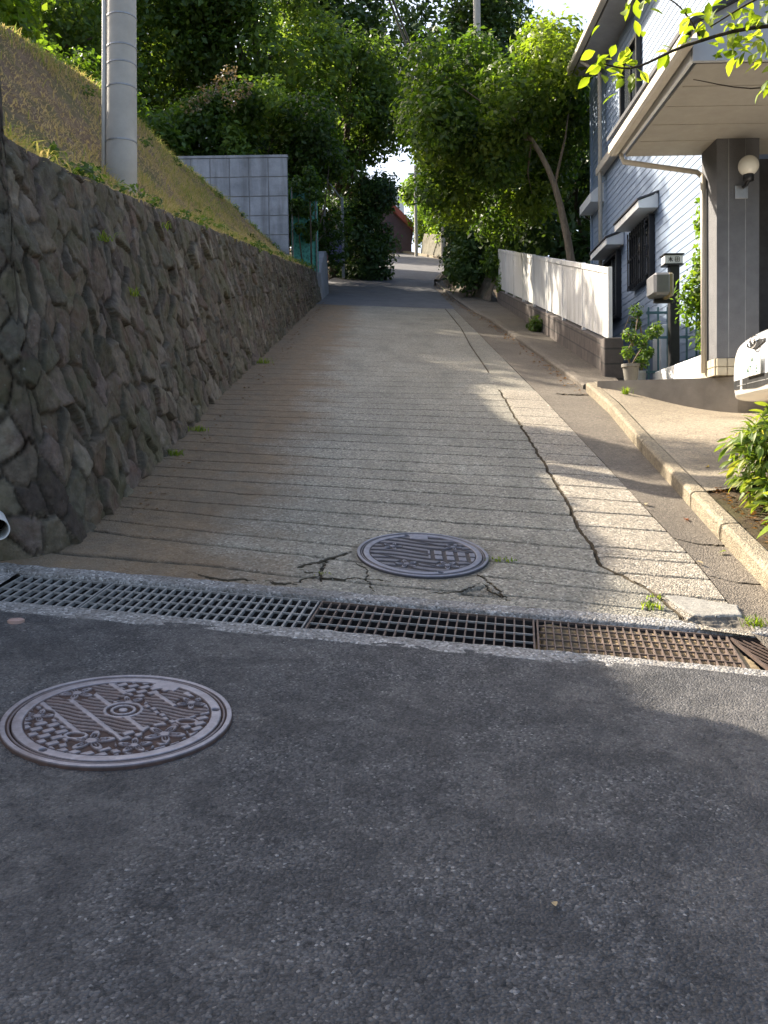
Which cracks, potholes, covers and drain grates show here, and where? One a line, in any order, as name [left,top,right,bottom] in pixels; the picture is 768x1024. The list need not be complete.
crack [195,551,390,591]
manhole cover [357,532,489,579]
crack [432,391,733,623]
drain grate [536,619,746,668]
drain grate [729,636,768,671]
drain grate [305,601,536,649]
drain grate [79,583,320,628]
drain grate [0,575,111,608]
manhole cover [0,675,233,771]
